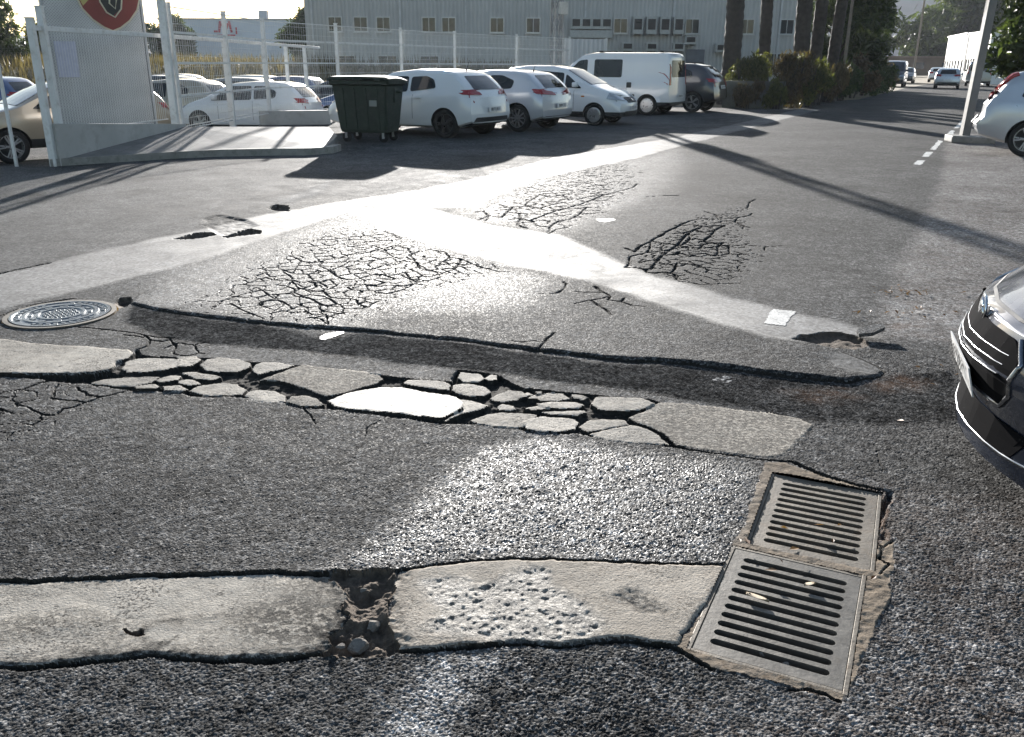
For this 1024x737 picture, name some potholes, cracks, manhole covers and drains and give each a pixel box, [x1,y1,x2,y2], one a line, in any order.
crack [539,199,776,315]
pothole [223,228,262,238]
drain grate [744,473,882,693]
crack [0,227,886,493]
pothole [320,567,400,658]
pothole [178,232,217,240]
manhole cover [2,300,117,329]
drain grate [686,545,867,696]
crack [478,164,680,234]
pothole [271,204,290,212]
pothole [793,332,868,350]
